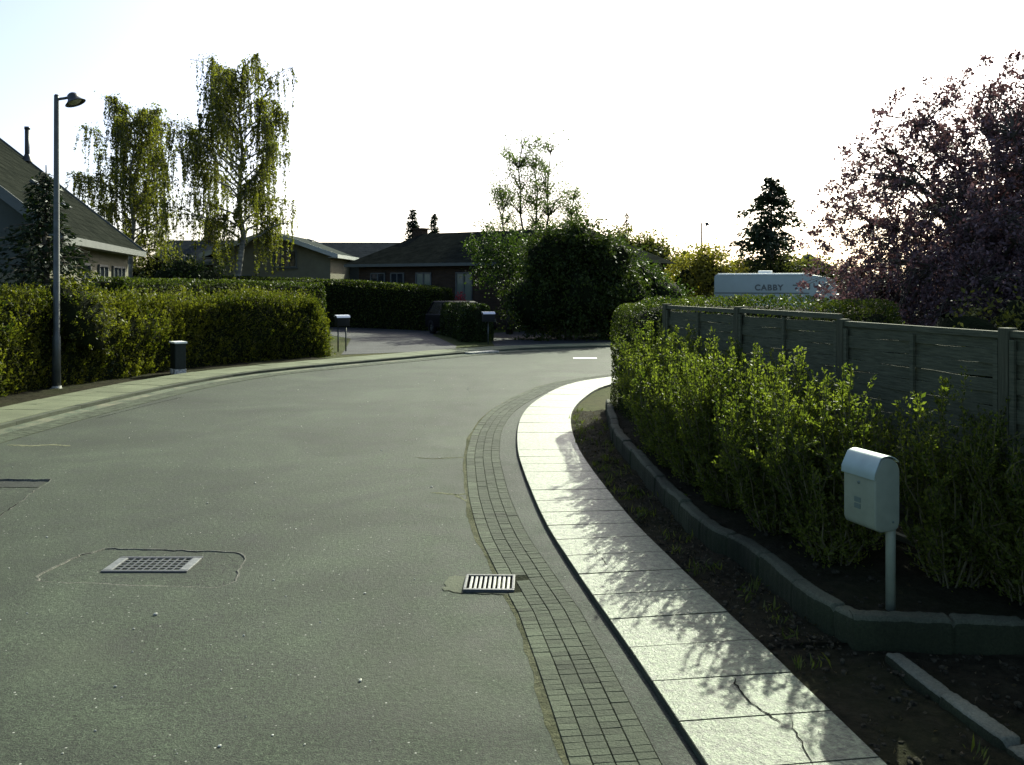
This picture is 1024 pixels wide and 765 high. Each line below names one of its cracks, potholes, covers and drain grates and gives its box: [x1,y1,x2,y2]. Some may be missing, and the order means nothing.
crack [733,677,813,763]
drain grate [442,574,515,595]
